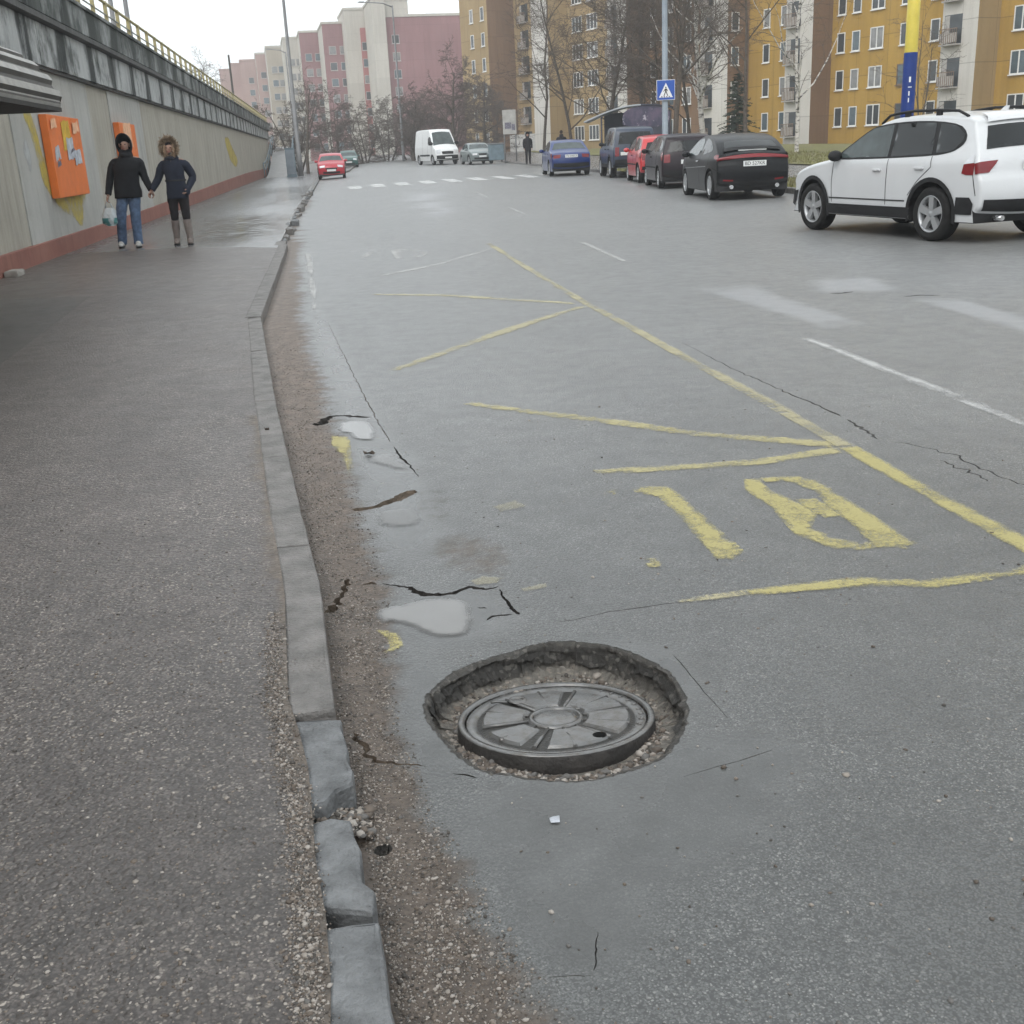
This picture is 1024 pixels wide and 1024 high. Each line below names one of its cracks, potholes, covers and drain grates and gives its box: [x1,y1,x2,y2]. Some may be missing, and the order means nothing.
crack [554,935,598,977]
pothole [373,844,393,856]
crack [684,750,771,777]
crack [674,656,727,717]
crack [352,733,422,766]
manhole cover [458,682,656,775]
crack [312,415,369,426]
crack [352,490,417,511]
crack [325,579,520,620]
pothole [422,640,690,783]
